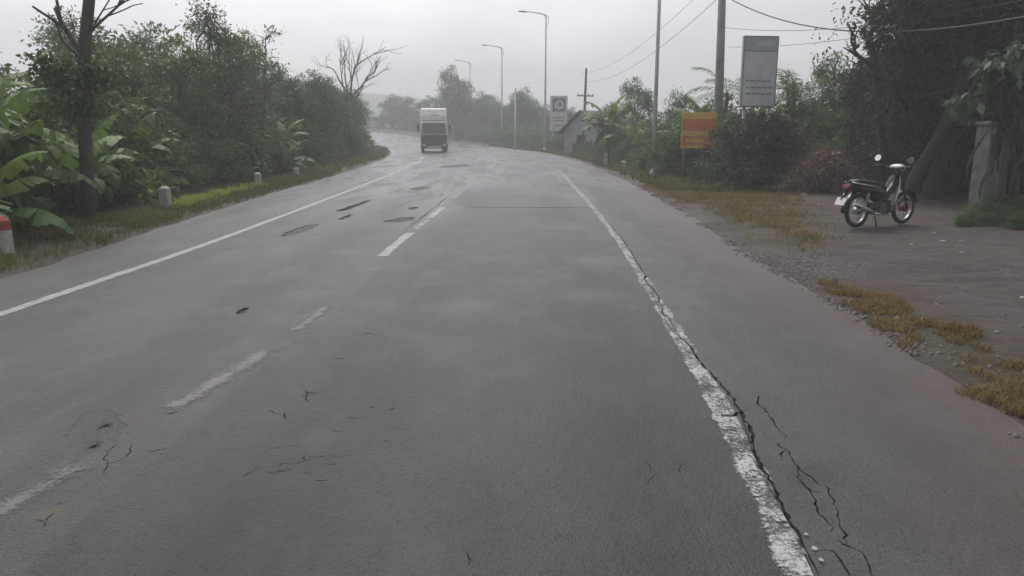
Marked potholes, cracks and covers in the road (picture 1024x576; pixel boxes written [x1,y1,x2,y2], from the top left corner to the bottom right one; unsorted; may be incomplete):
crack [75,445,132,476]
crack [244,445,357,481]
pothole [280,224,320,236]
crack [678,335,873,576]
